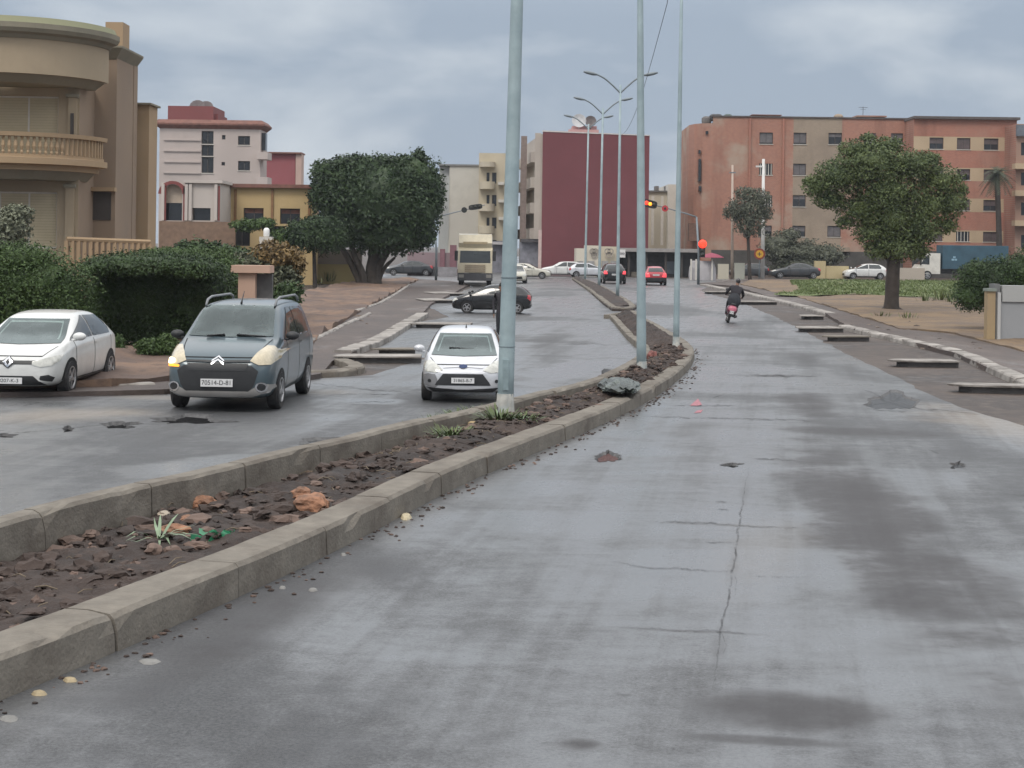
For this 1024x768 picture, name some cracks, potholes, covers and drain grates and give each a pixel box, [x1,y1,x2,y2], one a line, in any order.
pothole [152,413,240,424]
pothole [595,450,621,462]
pothole [863,390,920,409]
pothole [100,421,143,429]
